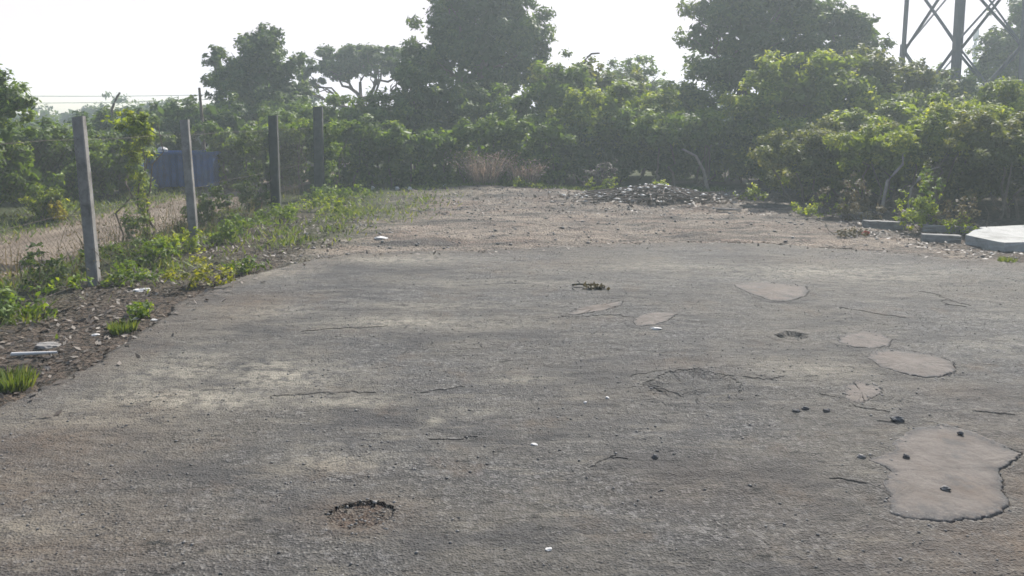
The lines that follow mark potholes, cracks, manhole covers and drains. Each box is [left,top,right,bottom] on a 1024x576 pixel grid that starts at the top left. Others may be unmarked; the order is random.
crack [590,451,628,467]
crack [269,390,376,398]
crack [919,291,971,307]
pothole [305,491,413,541]
crack [820,393,1015,428]
crack [830,477,892,497]
crack [630,367,681,397]
pothole [763,329,819,343]
